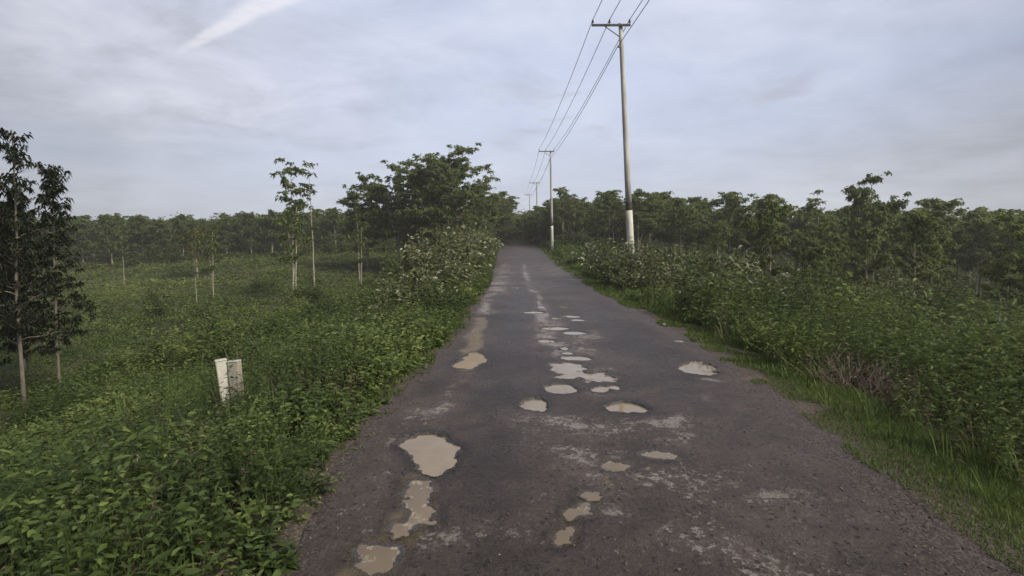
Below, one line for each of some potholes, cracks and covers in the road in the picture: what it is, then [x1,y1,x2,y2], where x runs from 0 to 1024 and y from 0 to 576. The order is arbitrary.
pothole [547,361,623,383]
pothole [541,383,578,394]
pothole [384,477,439,541]
pothole [451,352,489,369]
pothole [590,384,622,392]
pothole [576,490,605,502]
pothole [636,449,679,460]
pothole [396,431,464,478]
pothole [602,400,652,413]
pothole [517,397,549,412]
pothole [551,525,578,548]
pothole [599,459,633,472]
